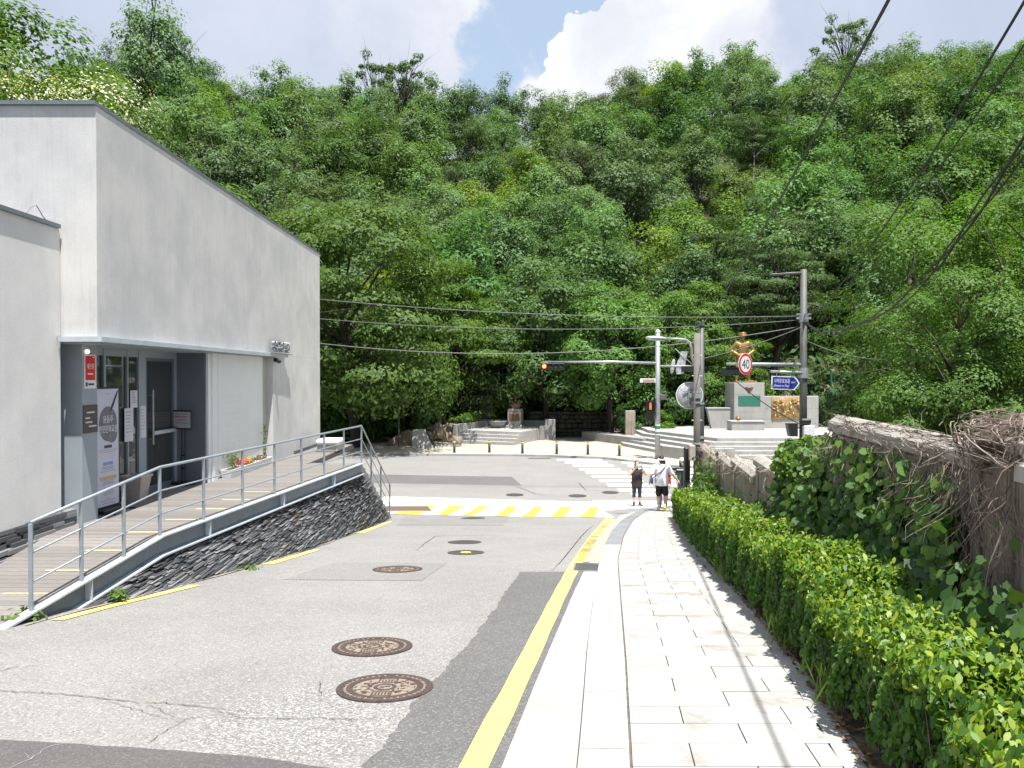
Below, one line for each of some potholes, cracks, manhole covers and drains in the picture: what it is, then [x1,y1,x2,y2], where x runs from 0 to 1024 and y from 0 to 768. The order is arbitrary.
manhole cover [331,637,412,657]
drain grate [572,562,599,572]
manhole cover [336,674,433,703]
crack [1,690,377,745]
